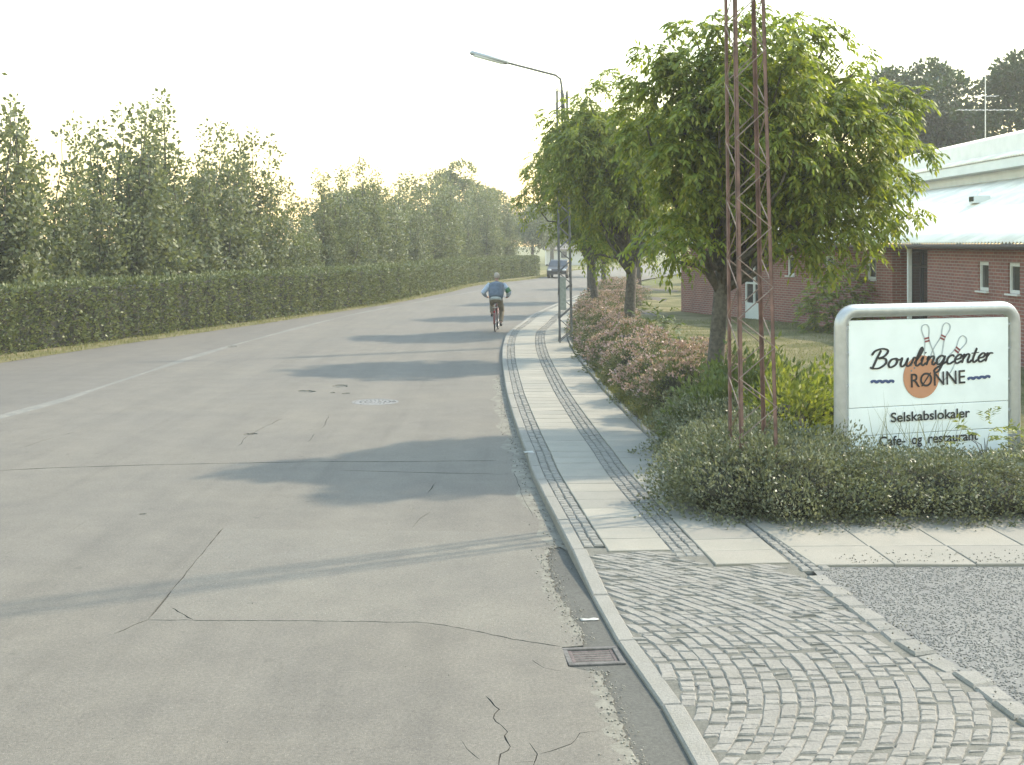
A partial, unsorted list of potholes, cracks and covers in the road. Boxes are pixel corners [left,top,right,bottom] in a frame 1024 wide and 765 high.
drain grate [562,646,626,667]
crack [487,697,585,765]
